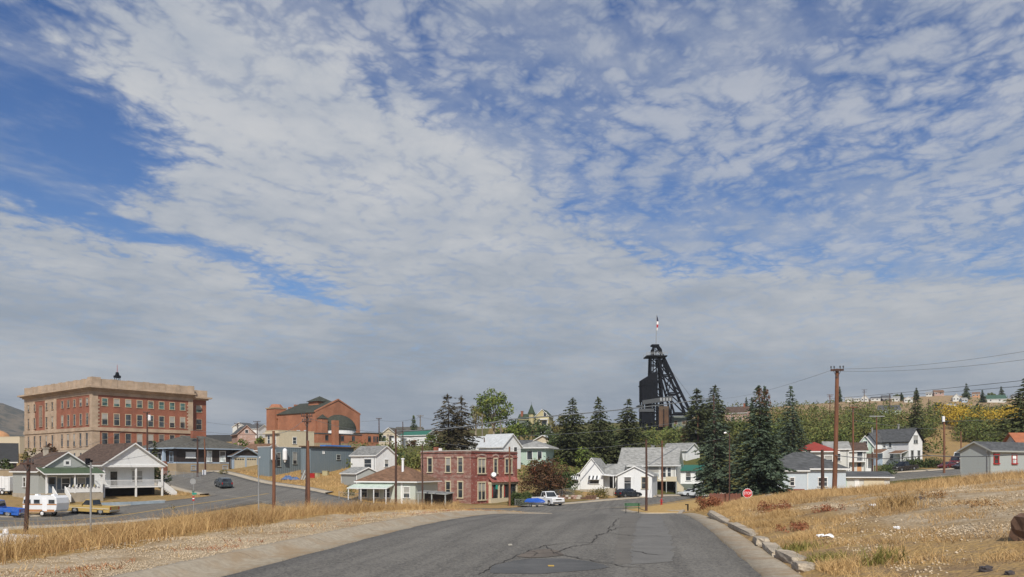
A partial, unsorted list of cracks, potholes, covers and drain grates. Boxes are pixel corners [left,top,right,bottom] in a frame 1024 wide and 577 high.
crack [473,518,663,576]
